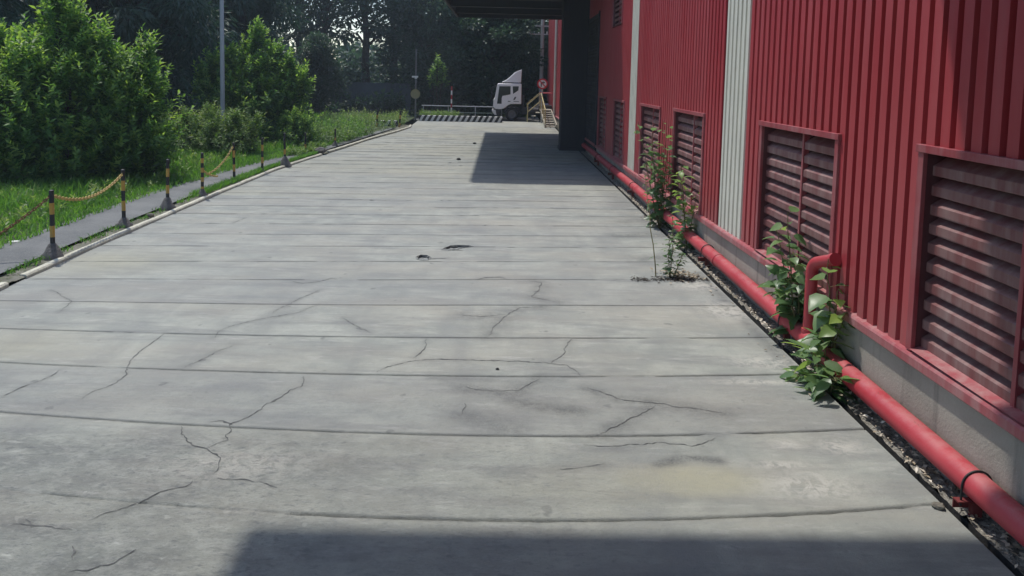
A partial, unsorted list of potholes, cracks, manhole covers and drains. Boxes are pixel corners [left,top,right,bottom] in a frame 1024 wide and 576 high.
crack [377,341,721,446]
crack [187,278,330,366]
crack [181,376,304,487]
crack [95,482,192,518]
crack [14,519,136,572]
